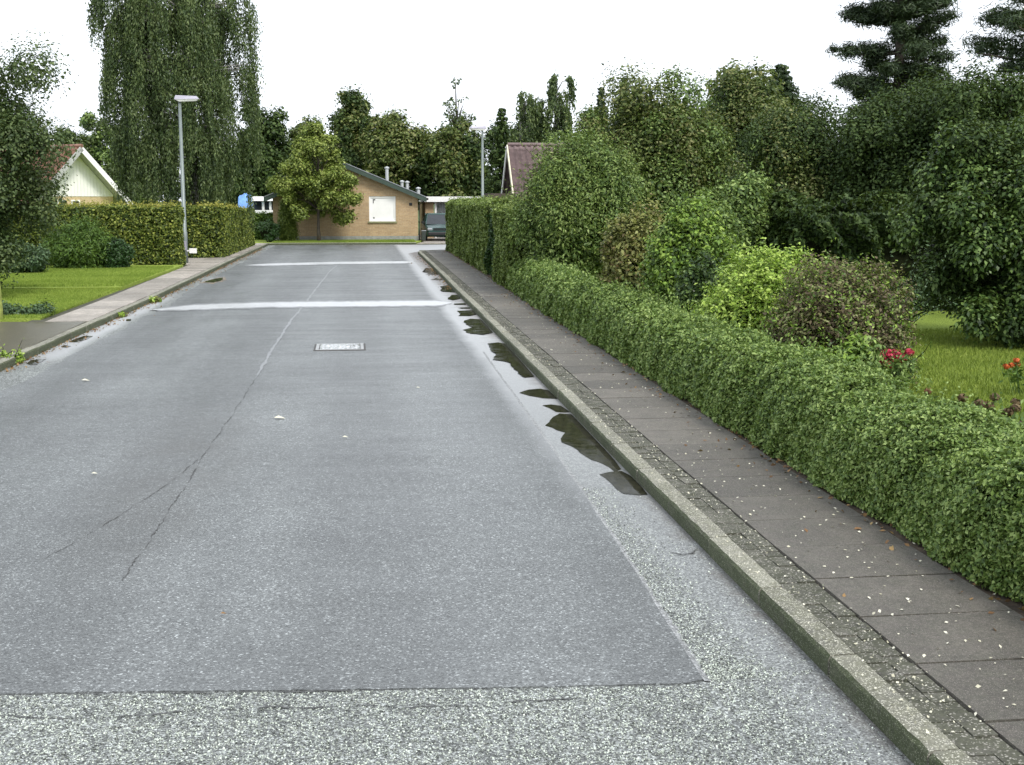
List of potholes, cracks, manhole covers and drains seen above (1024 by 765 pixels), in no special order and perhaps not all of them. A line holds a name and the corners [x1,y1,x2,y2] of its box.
crack [46,381,254,586]
manhole cover [313,343,366,351]
